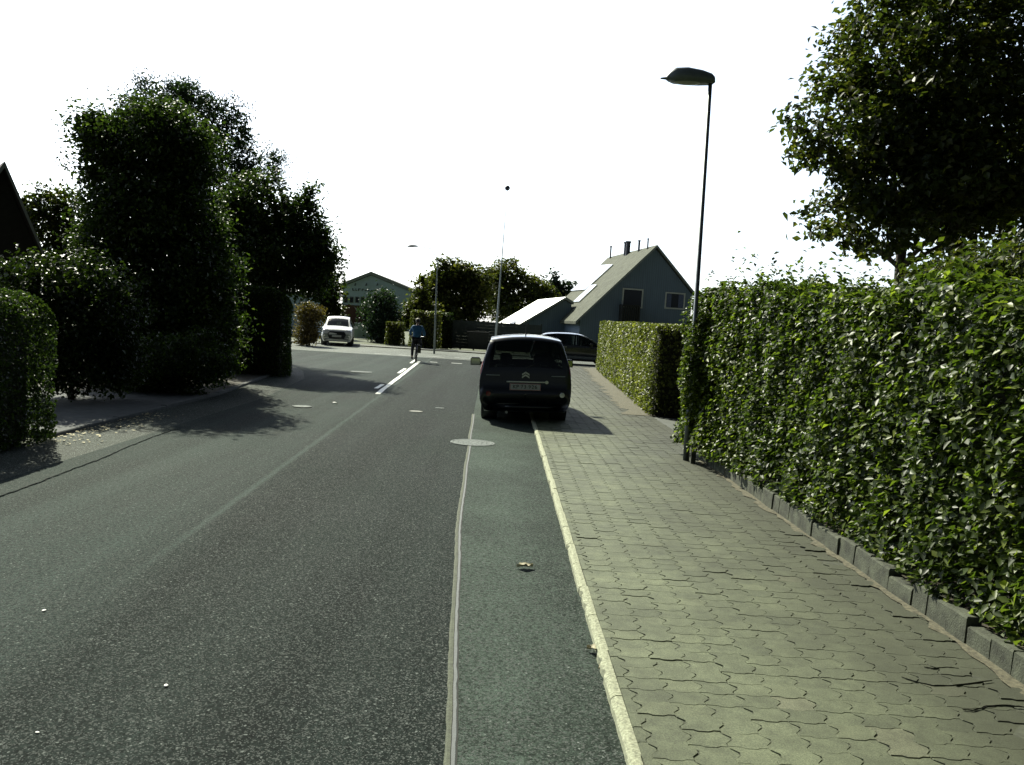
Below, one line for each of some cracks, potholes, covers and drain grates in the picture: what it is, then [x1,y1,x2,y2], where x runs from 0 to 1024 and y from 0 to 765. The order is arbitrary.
crack [0,427,181,497]
crack [902,667,992,686]
